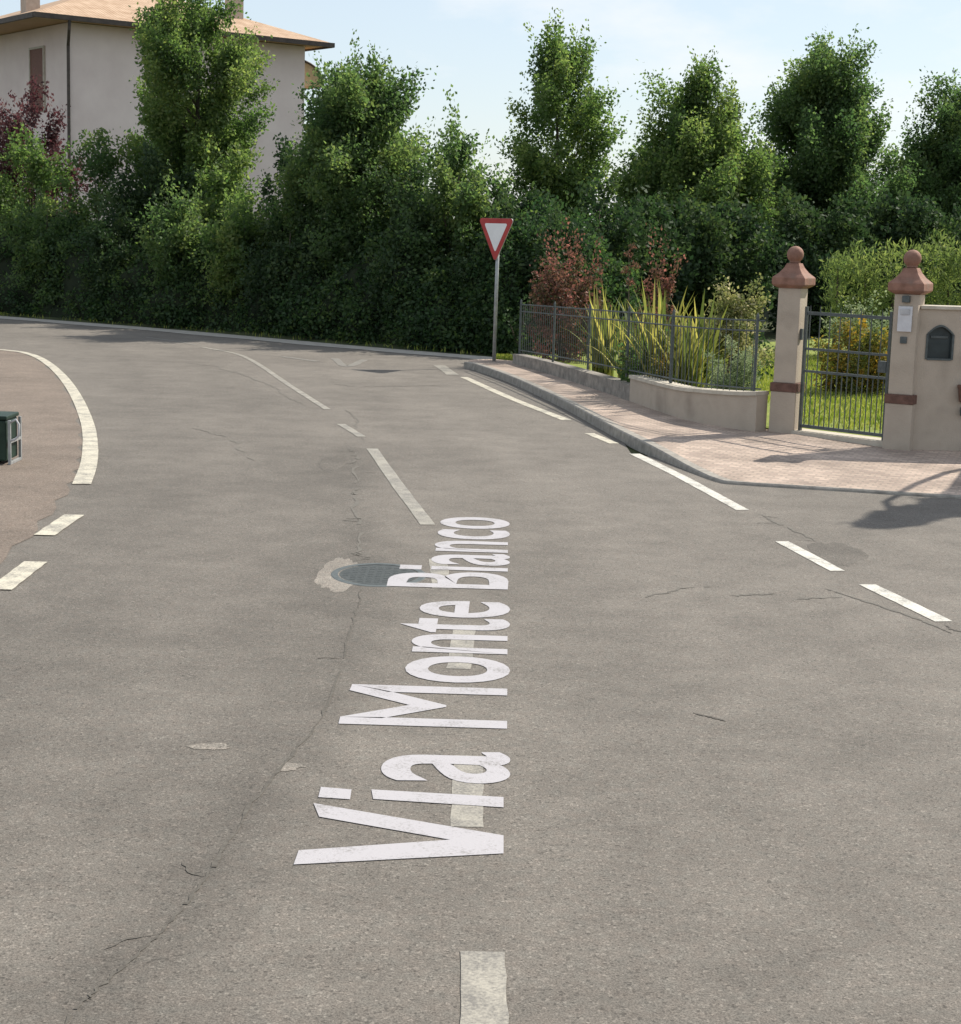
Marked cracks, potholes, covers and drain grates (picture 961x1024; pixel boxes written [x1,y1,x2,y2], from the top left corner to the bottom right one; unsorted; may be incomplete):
crack [65,589,362,1024]
crack [192,363,305,406]
crack [646,586,710,597]
manhole cover [331,563,426,587]
crack [193,428,255,461]
crack [798,588,958,633]
crack [342,410,375,561]
crack [762,515,816,542]
